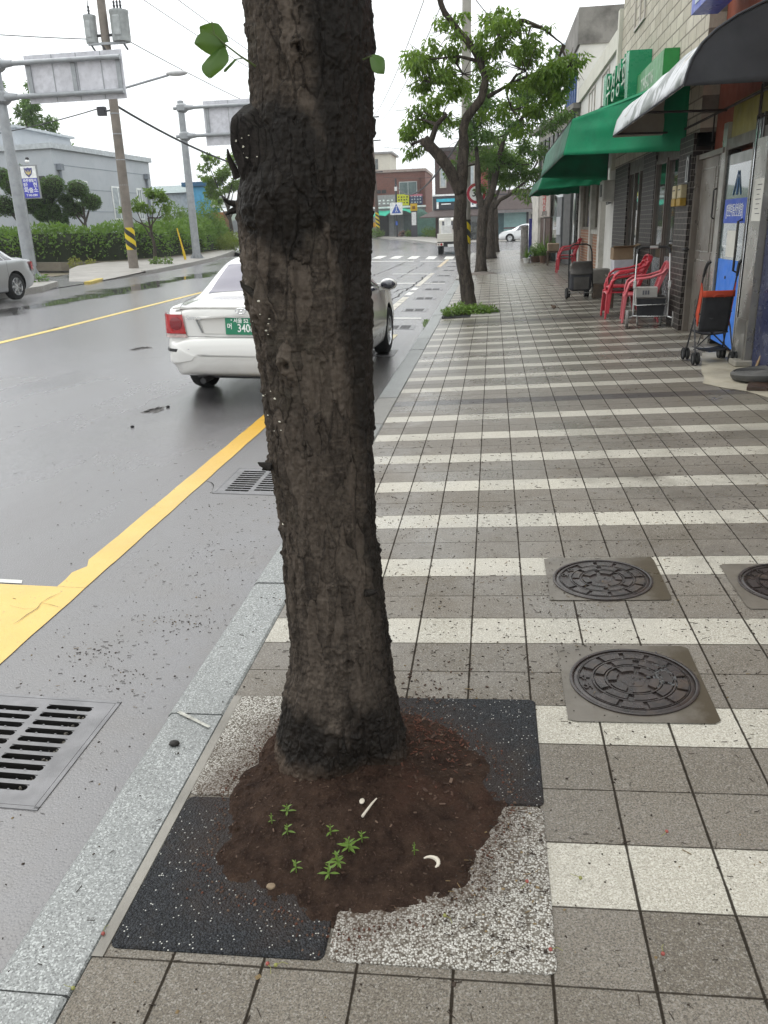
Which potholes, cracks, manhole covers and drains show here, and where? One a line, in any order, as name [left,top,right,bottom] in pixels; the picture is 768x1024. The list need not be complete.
drain grate [0,693,122,811]
drain grate [212,468,275,496]
manhole cover [544,557,671,601]
manhole cover [720,563,768,609]
manhole cover [557,645,721,724]
